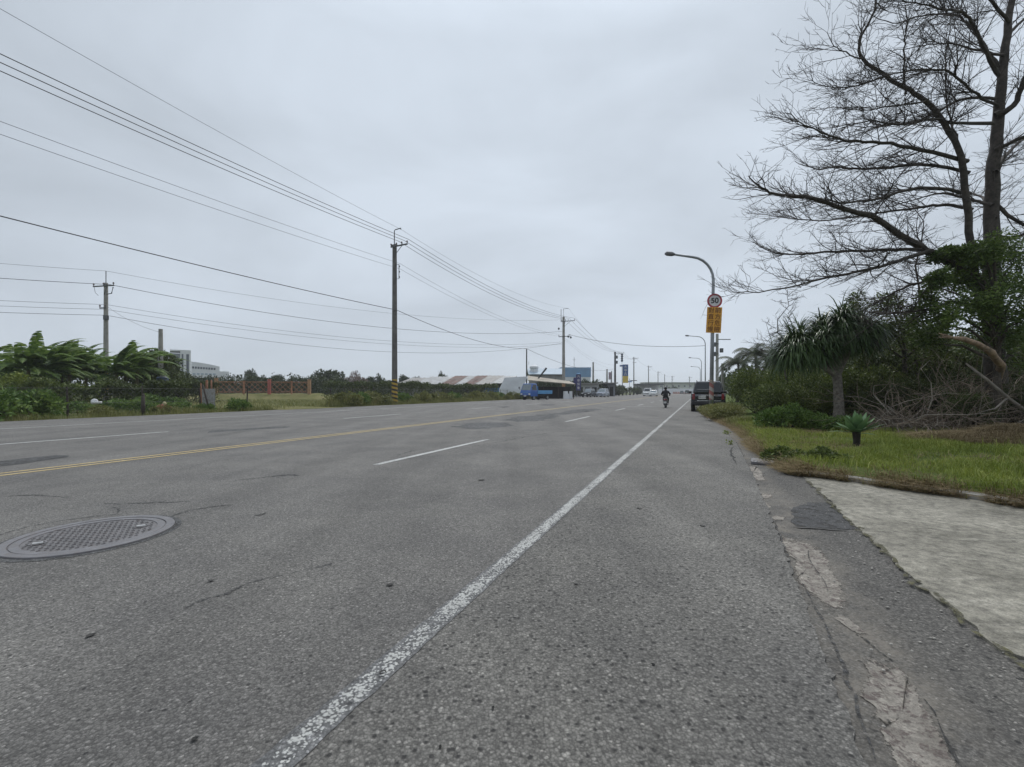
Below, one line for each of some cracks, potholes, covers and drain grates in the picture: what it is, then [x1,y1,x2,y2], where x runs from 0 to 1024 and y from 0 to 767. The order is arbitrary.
crack [924,699,962,767]
crack [794,550,876,760]
crack [807,481,1024,668]
crack [0,501,224,535]
crack [774,521,838,563]
manhole cover [0,515,175,560]
crack [186,559,345,607]
